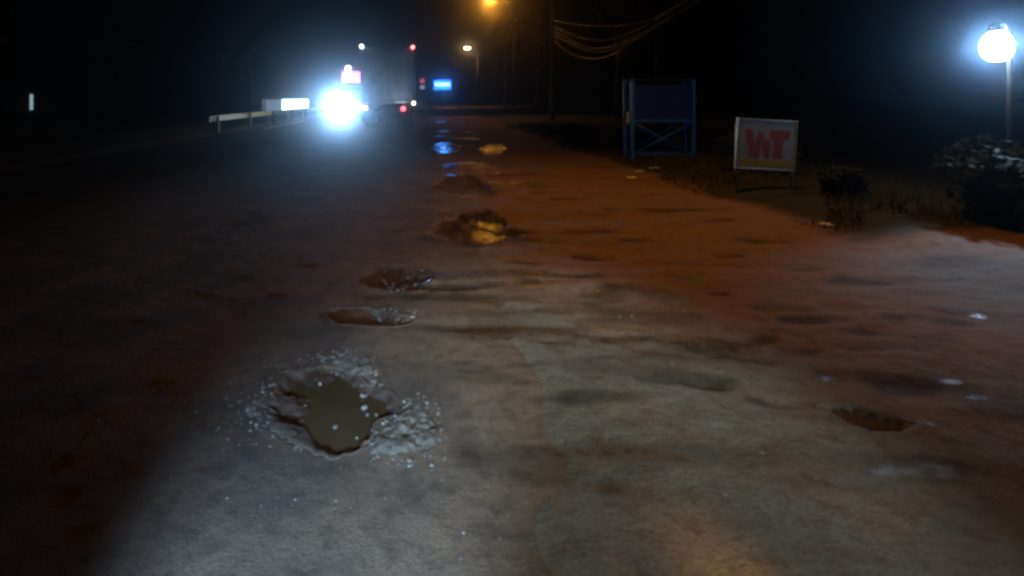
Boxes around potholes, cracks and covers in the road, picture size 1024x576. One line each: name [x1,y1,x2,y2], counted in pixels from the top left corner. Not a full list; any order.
pothole [353,264,440,296]
pothole [426,172,505,196]
pothole [425,207,542,246]
pothole [246,355,440,460]
pothole [810,398,930,439]
pothole [319,305,422,328]
